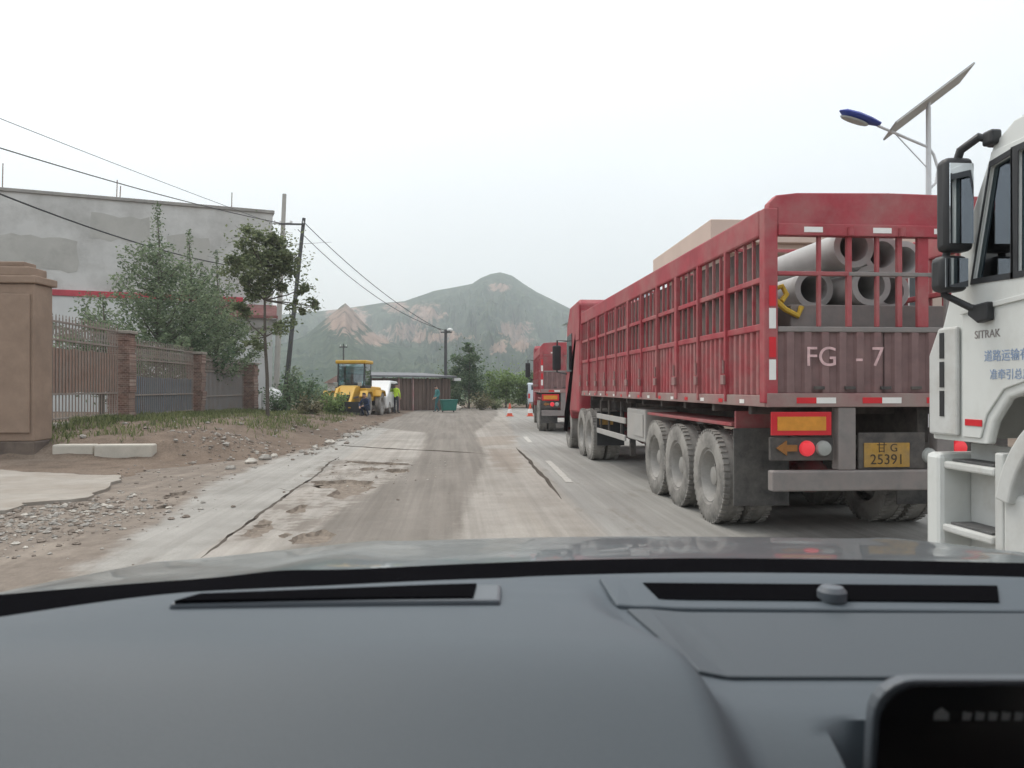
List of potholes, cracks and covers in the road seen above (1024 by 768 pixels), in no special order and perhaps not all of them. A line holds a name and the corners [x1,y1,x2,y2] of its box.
pothole [286,504,309,515]
pothole [311,480,376,499]
pothole [288,529,336,545]
crack [201,445,481,558]
crack [516,448,562,499]
